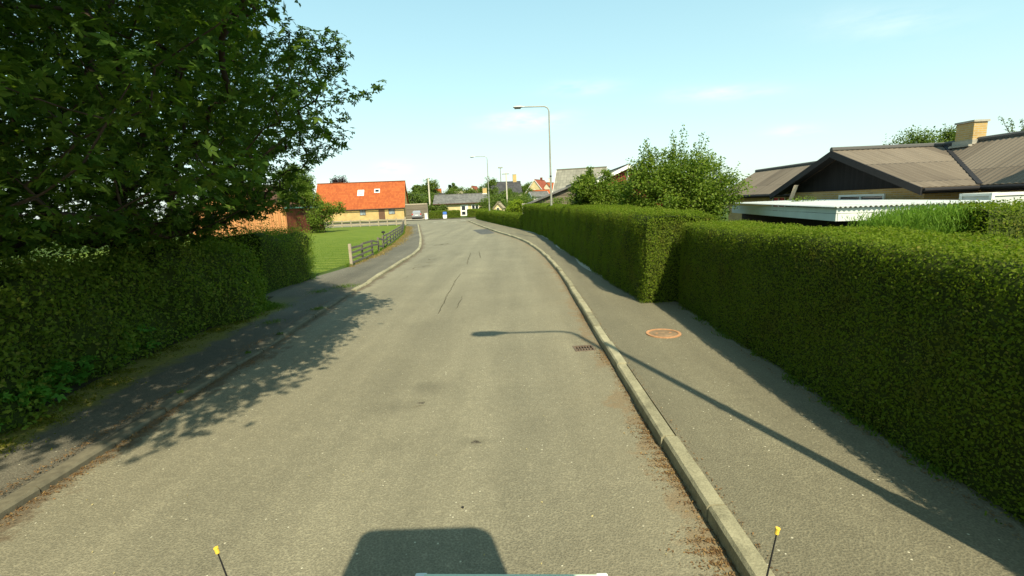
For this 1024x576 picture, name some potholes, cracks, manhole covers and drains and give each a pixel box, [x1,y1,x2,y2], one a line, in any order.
manhole cover [646,329,681,338]
crack [438,253,481,314]
